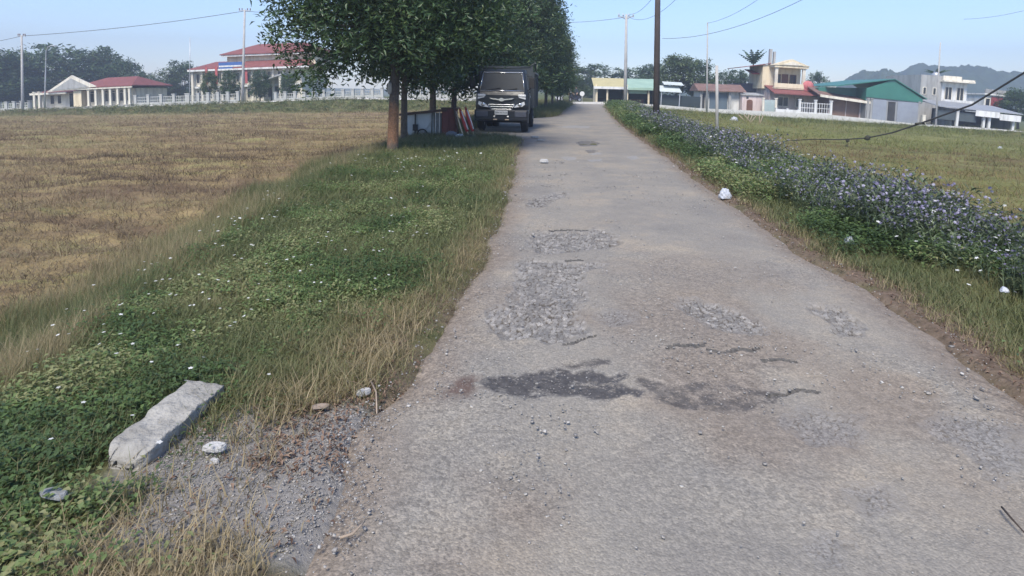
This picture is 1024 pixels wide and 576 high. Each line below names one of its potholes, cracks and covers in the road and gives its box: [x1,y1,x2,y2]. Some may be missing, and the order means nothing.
crack [666,343,798,363]
pothole [803,302,869,338]
pothole [524,226,625,255]
pothole [525,191,572,208]
pothole [673,295,771,336]
pothole [483,257,610,345]
